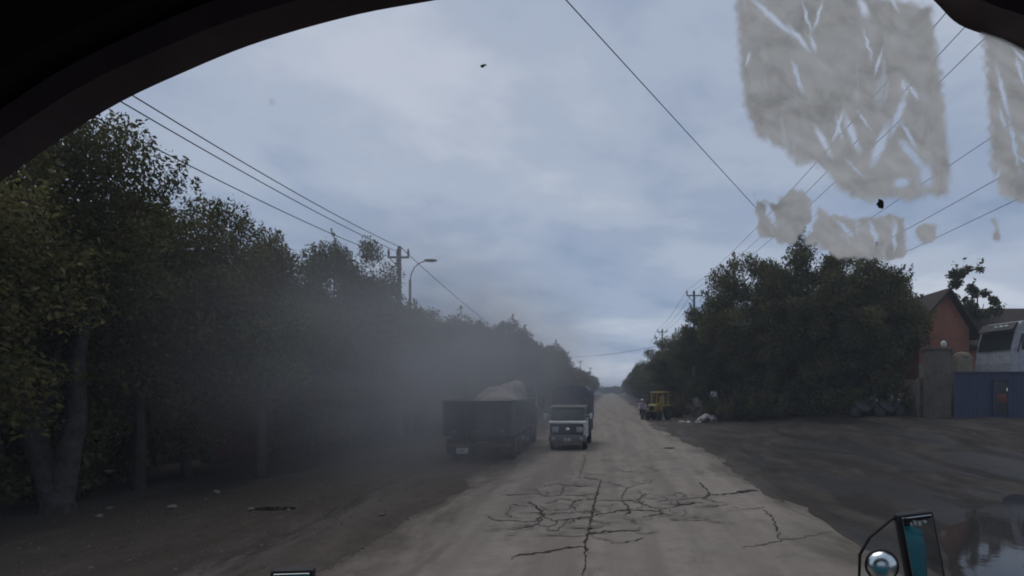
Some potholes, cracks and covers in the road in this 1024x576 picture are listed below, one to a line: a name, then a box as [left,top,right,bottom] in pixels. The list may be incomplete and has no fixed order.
crack [488,449,831,576]
